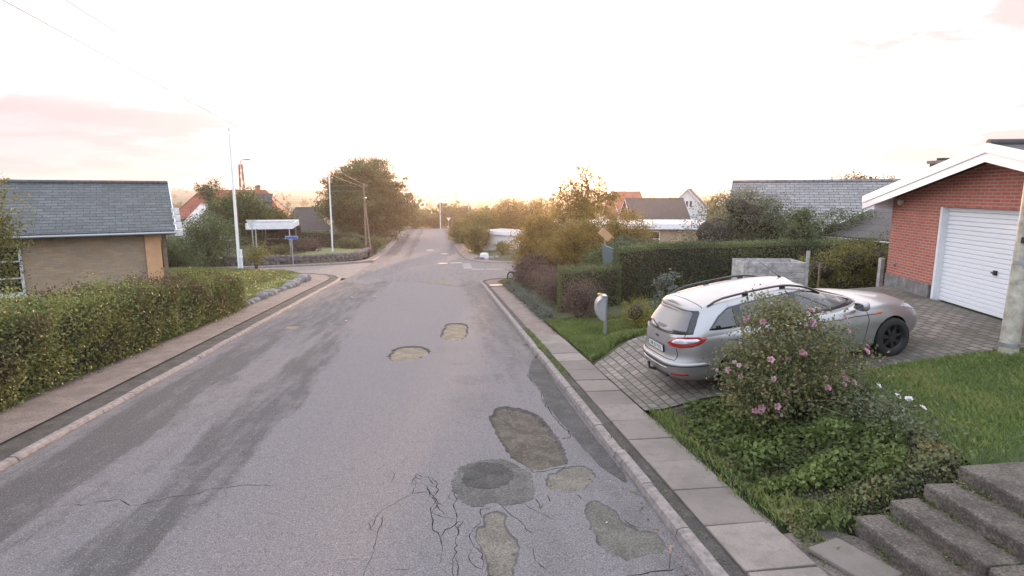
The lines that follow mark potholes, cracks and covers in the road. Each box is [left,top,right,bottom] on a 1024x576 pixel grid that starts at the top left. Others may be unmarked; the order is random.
crack [60,485,272,506]
crack [363,461,551,576]
